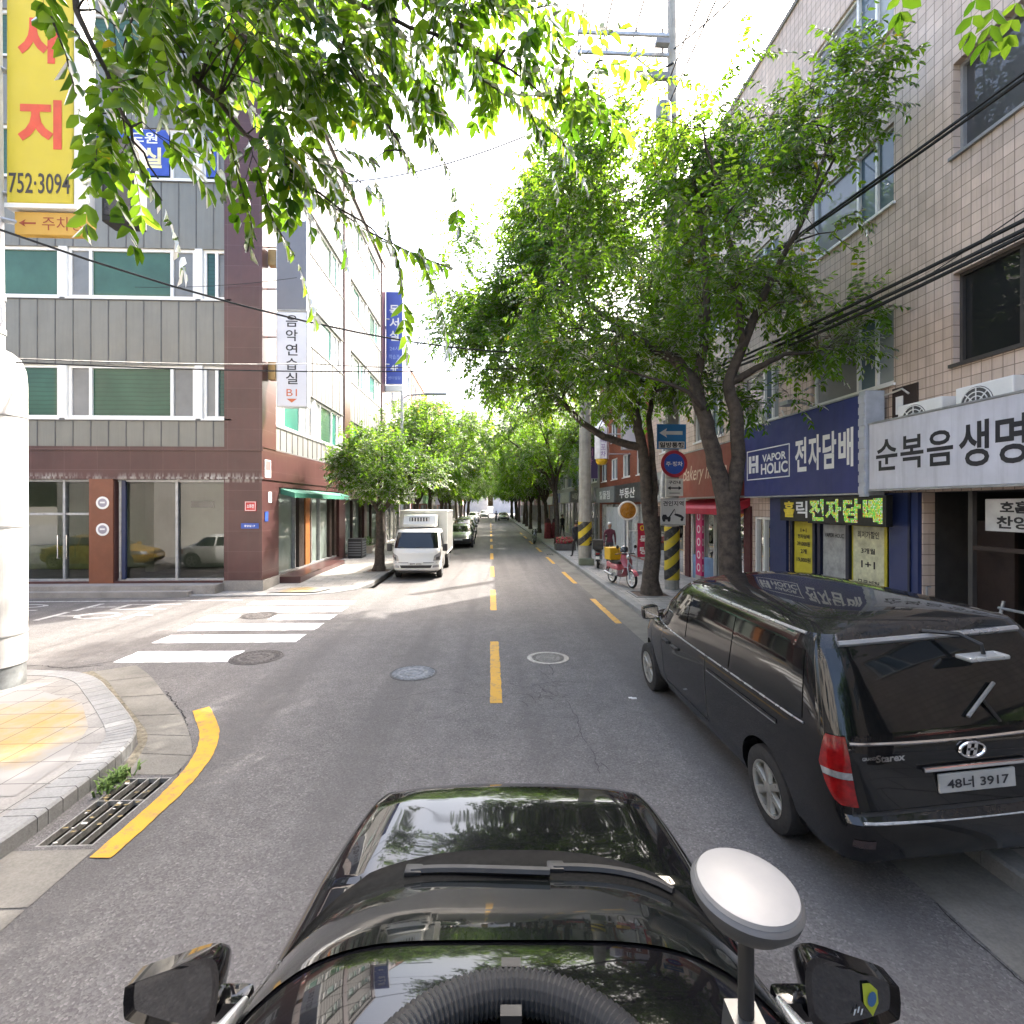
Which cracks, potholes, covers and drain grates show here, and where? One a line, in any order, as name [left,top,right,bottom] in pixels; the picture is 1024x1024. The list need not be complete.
drain grate [35,777,172,847]
manhole cover [389,665,437,681]
manhole cover [228,650,285,665]
manhole cover [240,611,278,619]
manhole cover [527,652,569,665]
crack [503,667,607,773]
